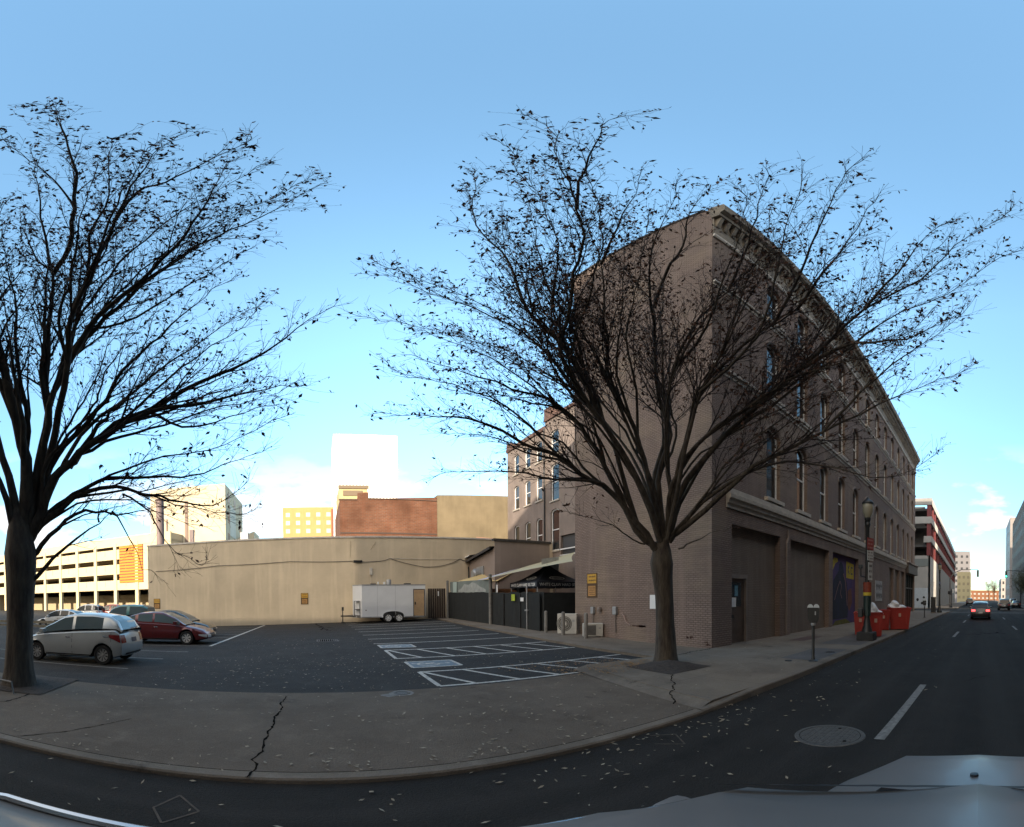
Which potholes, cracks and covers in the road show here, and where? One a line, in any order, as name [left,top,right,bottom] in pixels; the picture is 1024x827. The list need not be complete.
manhole cover [794,725,866,747]
crack [247,696,287,777]
